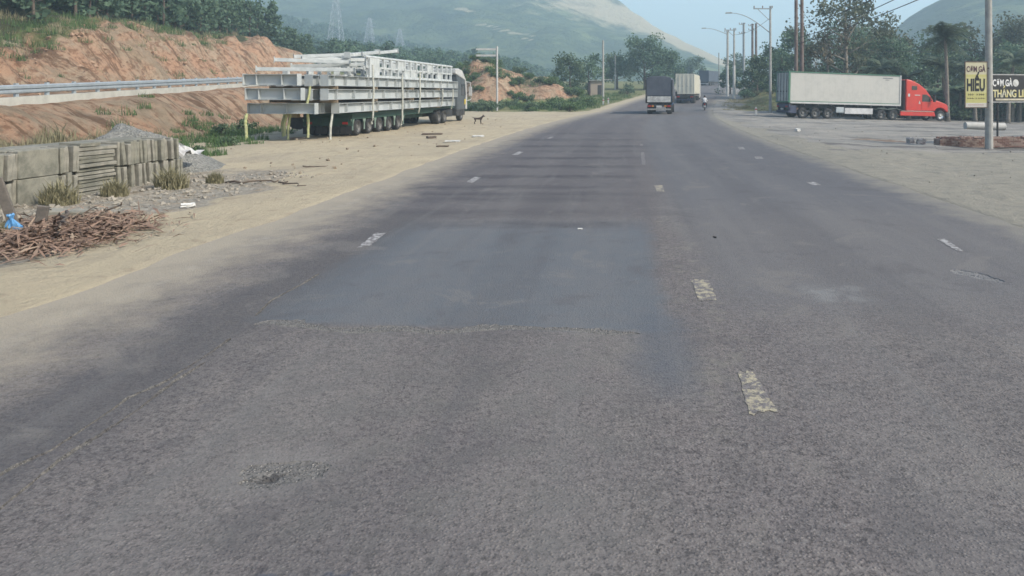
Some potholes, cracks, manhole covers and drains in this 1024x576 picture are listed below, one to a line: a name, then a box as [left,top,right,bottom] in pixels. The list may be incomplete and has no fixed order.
pothole [237,461,332,490]
